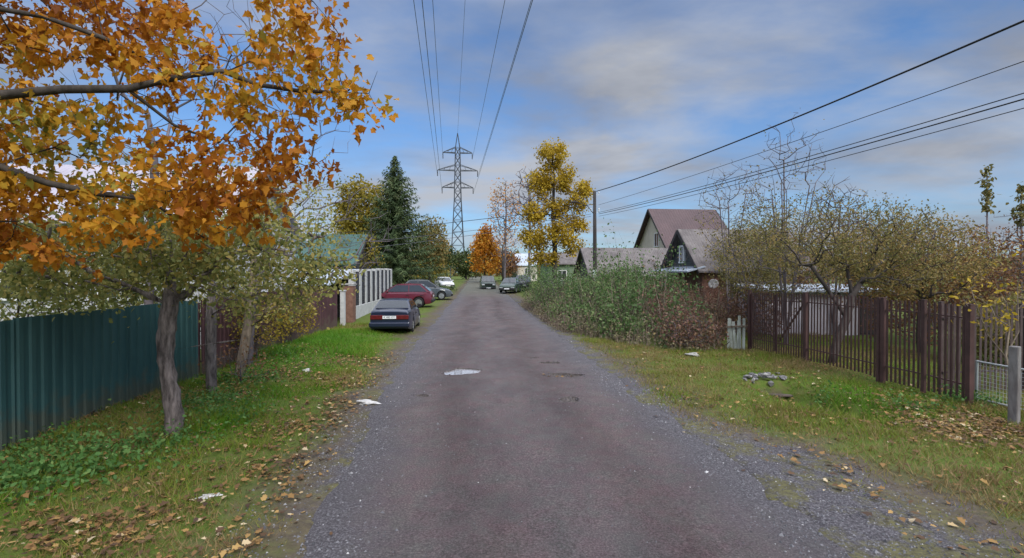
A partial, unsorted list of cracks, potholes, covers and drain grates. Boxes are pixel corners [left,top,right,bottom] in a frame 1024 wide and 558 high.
pothole [441,367,481,375]
